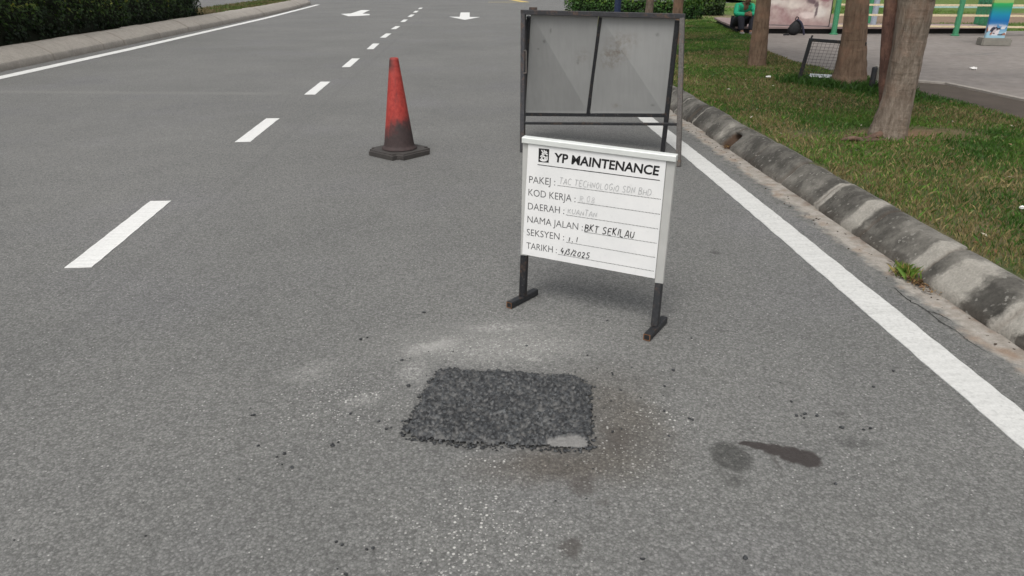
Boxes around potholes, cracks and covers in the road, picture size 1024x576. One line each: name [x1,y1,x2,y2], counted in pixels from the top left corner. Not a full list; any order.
crack [896,289,988,353]
